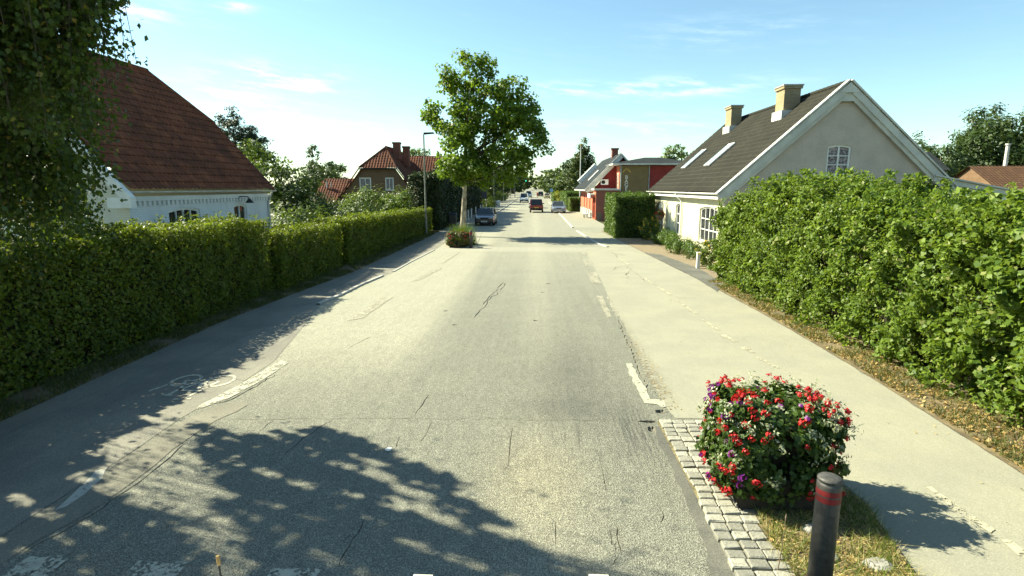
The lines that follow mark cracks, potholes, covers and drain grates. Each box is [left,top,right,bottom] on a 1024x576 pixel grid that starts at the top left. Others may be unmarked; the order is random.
crack [338,520,364,567]
